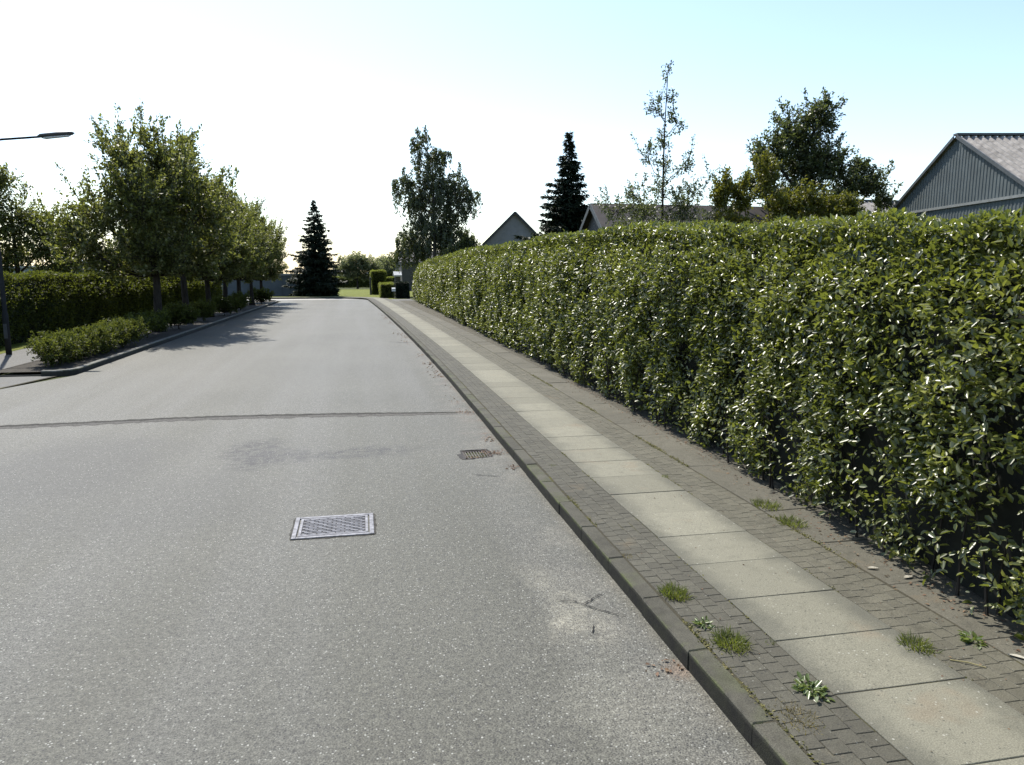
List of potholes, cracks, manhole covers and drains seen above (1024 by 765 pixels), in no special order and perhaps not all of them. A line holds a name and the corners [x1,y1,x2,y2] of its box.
drain grate [456,449,493,459]
crack [562,594,623,632]
